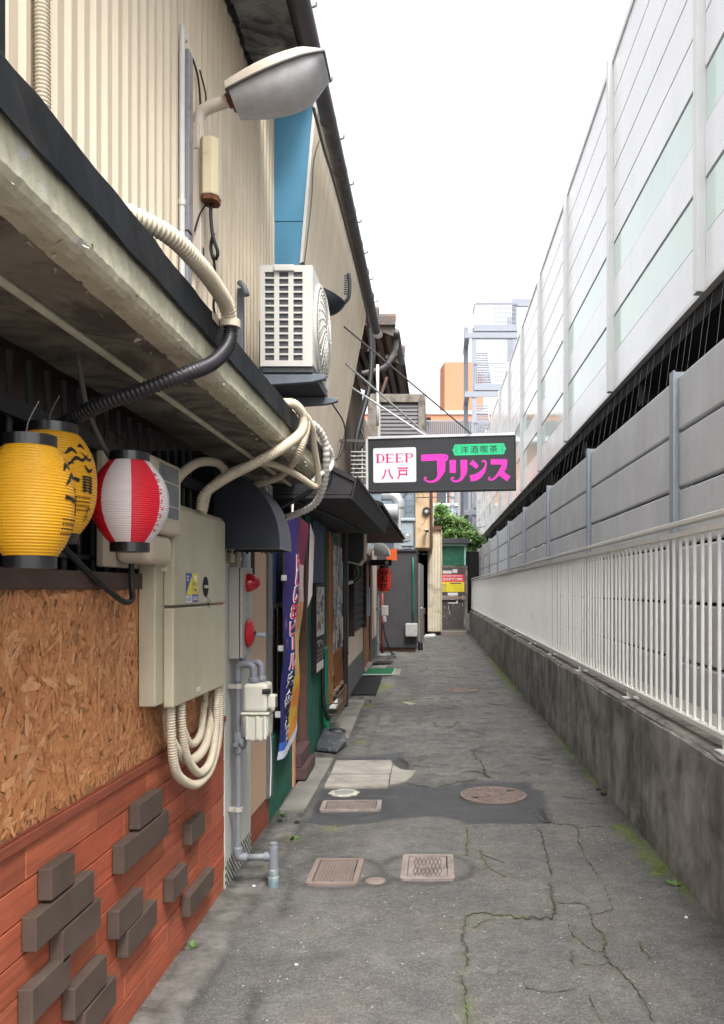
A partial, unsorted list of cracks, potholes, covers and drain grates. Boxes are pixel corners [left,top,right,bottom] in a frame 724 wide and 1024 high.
utility cover [328,789,360,797]
manhole cover [460,786,527,804]
utility cover [365,877,386,885]
crack [461,823,654,1021]
